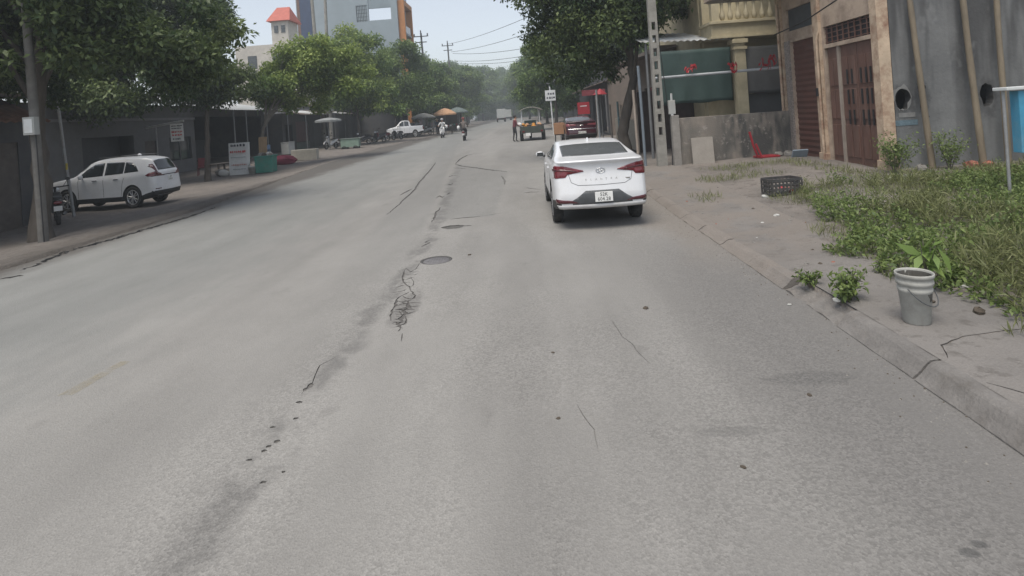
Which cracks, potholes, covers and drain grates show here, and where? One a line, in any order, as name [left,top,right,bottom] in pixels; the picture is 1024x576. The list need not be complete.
crack [390,163,436,212]
crack [941,328,1024,357]
crack [246,360,330,483]
crack [455,154,507,184]
manhole cover [420,256,452,265]
